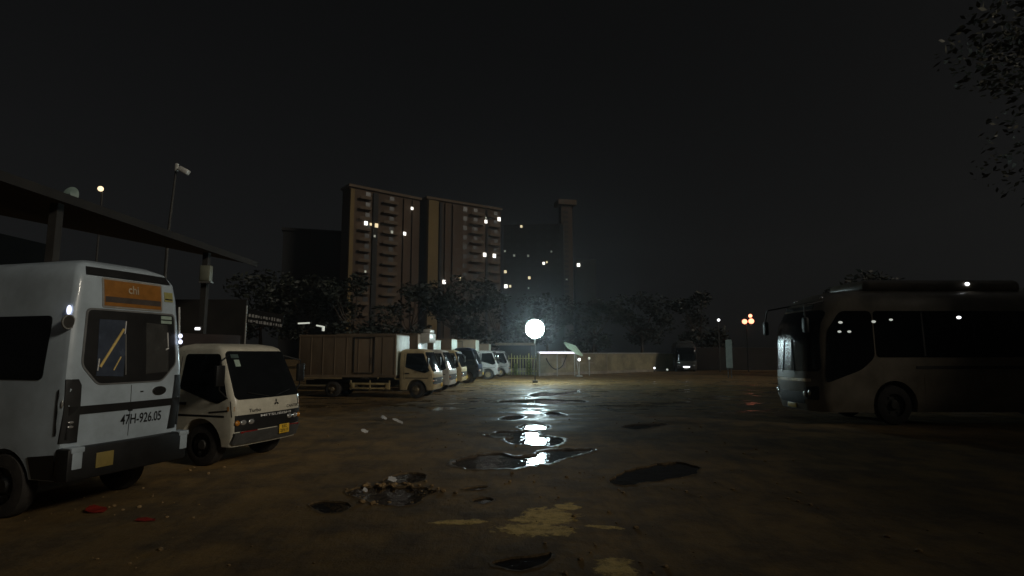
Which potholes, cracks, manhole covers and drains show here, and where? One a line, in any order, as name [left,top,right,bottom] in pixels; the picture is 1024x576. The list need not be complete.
pothole [469,496,496,504]
pothole [343,482,446,507]
pothole [488,551,555,571]
pothole [607,461,702,486]
pothole [306,500,355,514]
pothole [483,430,567,447]
pothole [380,472,428,483]
pothole [446,448,598,470]
